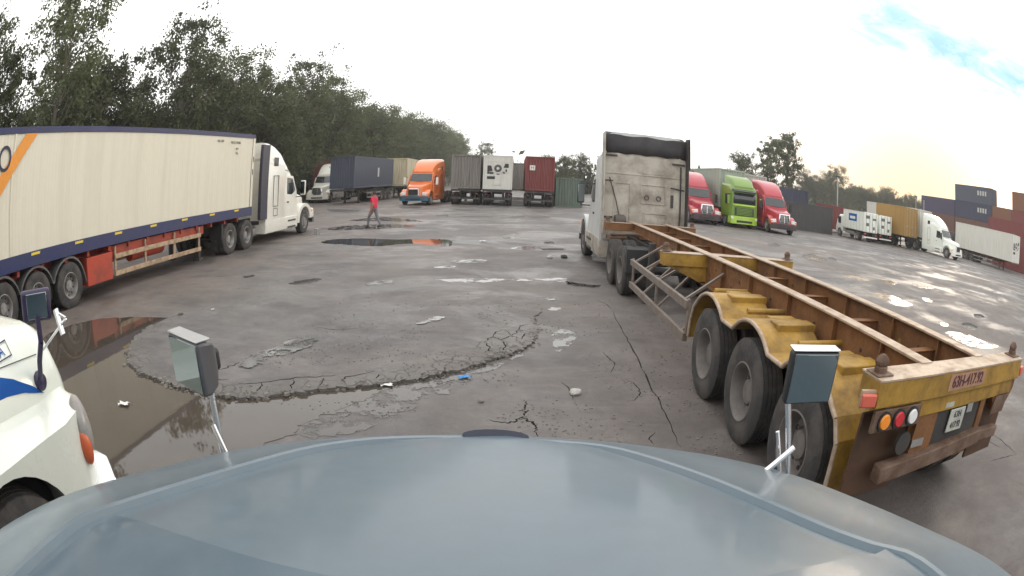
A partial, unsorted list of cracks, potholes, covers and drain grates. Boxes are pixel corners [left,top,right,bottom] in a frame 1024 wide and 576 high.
crack [491,400,538,437]
crack [603,304,681,447]
crack [484,324,530,352]
